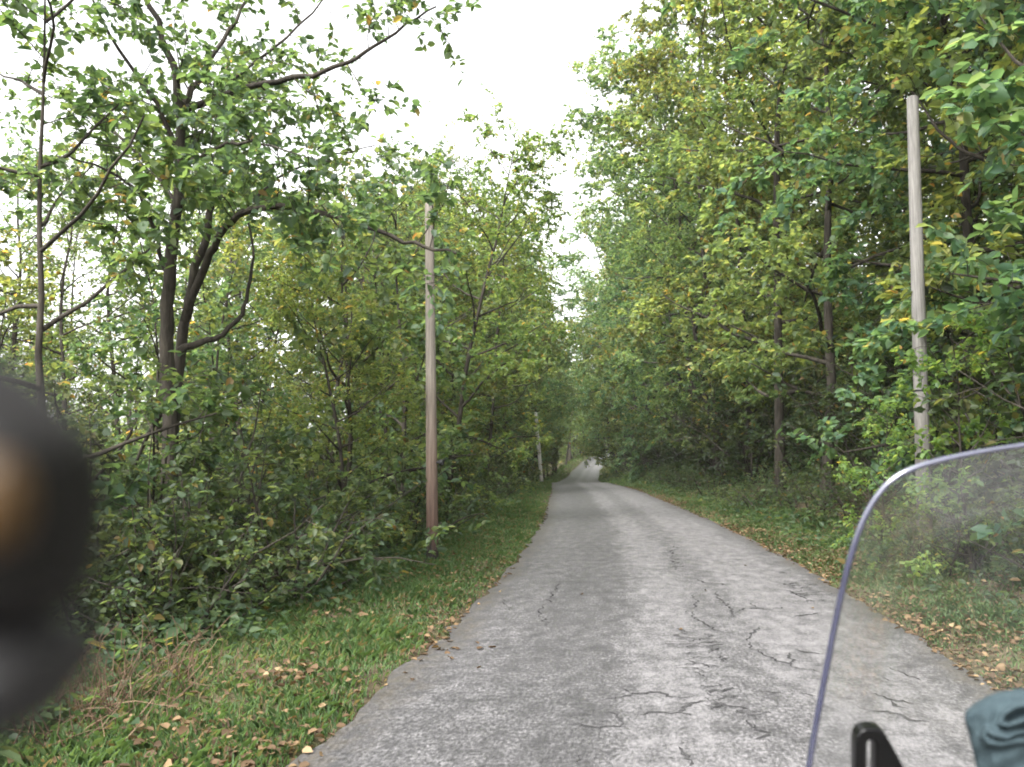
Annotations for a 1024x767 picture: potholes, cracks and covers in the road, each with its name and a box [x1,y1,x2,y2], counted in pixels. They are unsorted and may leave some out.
crack [862,666,930,722]
crack [579,547,831,739]
crack [663,742,693,766]
crack [538,582,561,630]
